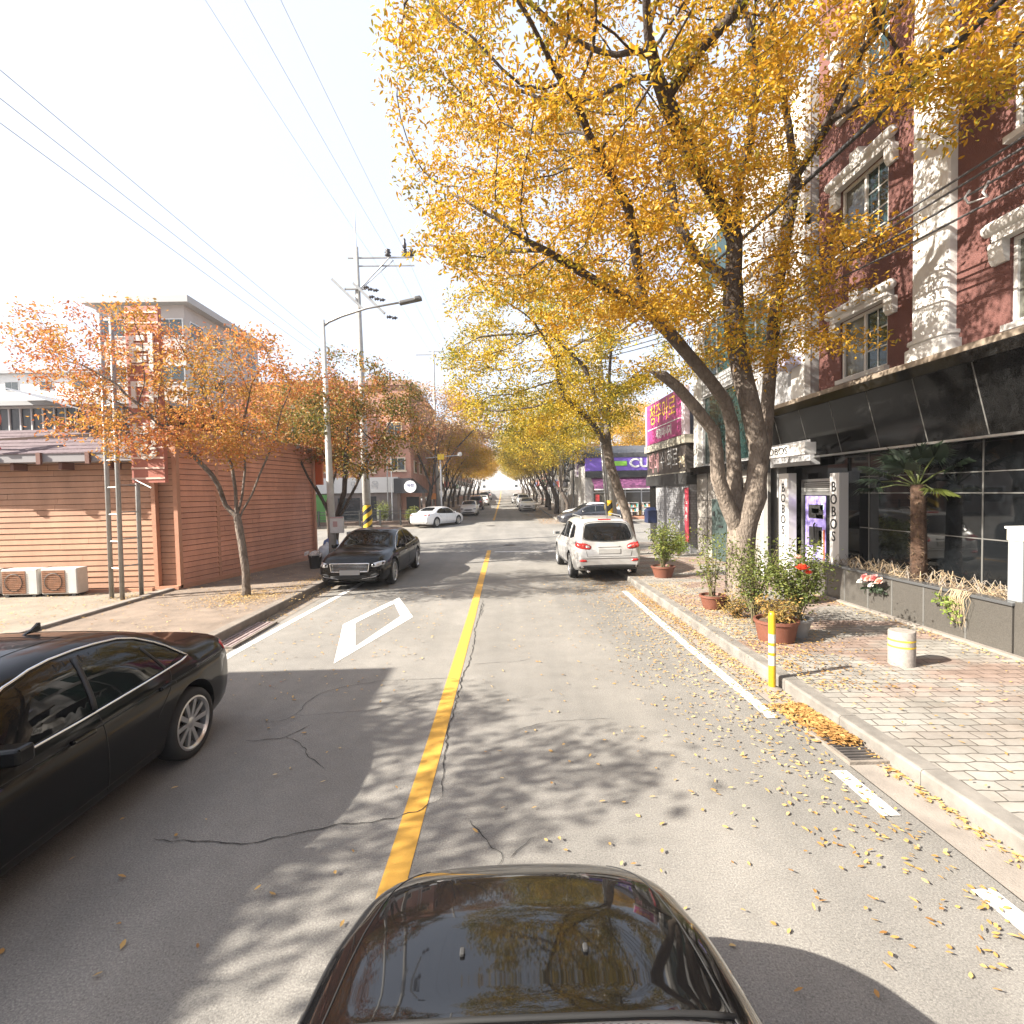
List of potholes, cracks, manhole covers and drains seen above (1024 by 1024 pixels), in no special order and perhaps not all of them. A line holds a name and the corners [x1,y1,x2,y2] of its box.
drain grate [805,727,890,769]
drain grate [221,621,277,651]
crack [156,603,522,844]
crack [470,821,533,865]
